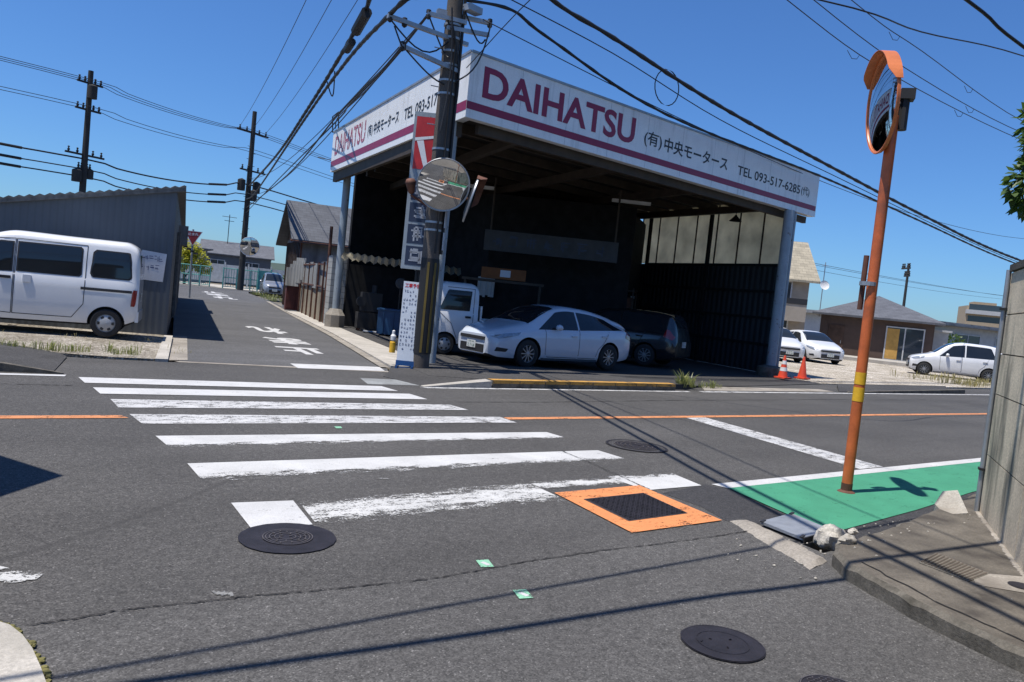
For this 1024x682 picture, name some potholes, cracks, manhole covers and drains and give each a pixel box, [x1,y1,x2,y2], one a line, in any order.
drain grate [919,553,989,582]
manhole cover [799,674,849,682]
manhole cover [238,523,336,553]
manhole cover [680,625,766,663]
manhole cover [605,439,668,453]
manhole cover [555,485,721,532]
